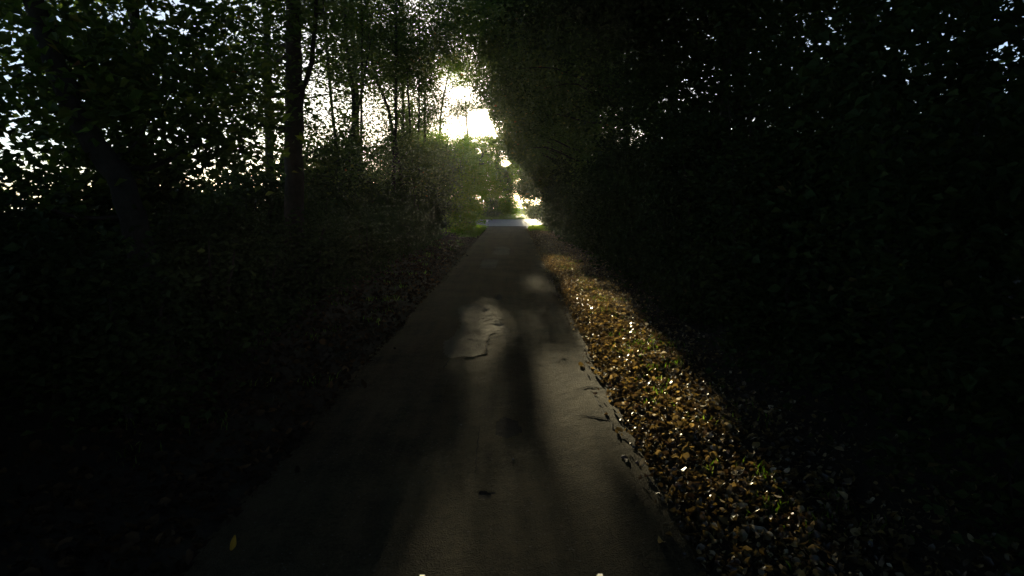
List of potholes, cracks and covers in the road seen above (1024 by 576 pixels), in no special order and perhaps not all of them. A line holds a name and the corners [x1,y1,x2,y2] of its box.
pothole [478,490,495,499]
crack [443,318,508,369]
crack [584,386,619,443]
